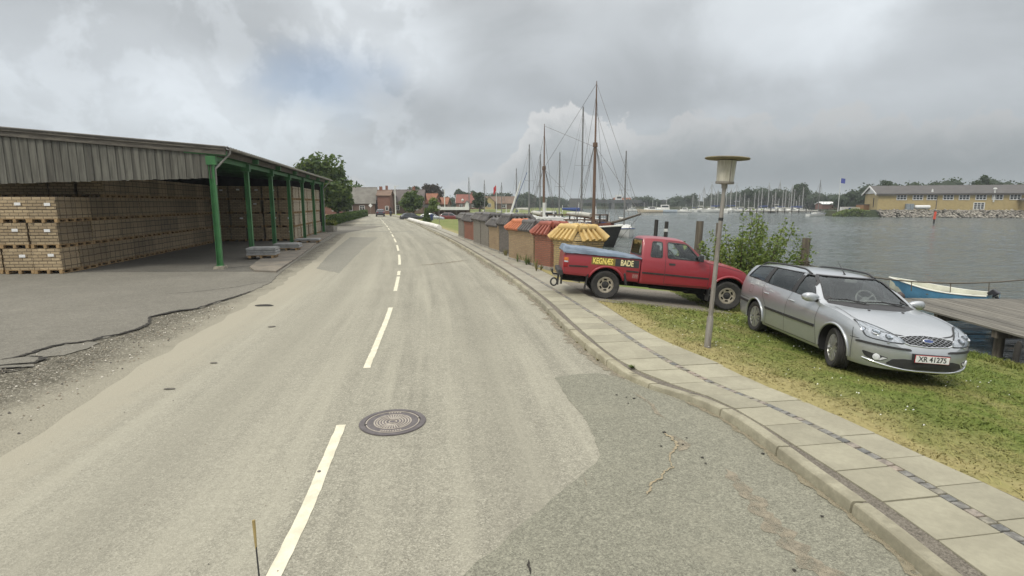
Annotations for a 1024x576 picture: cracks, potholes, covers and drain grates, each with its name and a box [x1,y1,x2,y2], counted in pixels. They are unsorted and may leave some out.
manhole cover [359,409,426,436]
crack [0,281,265,374]
crack [646,433,679,495]
